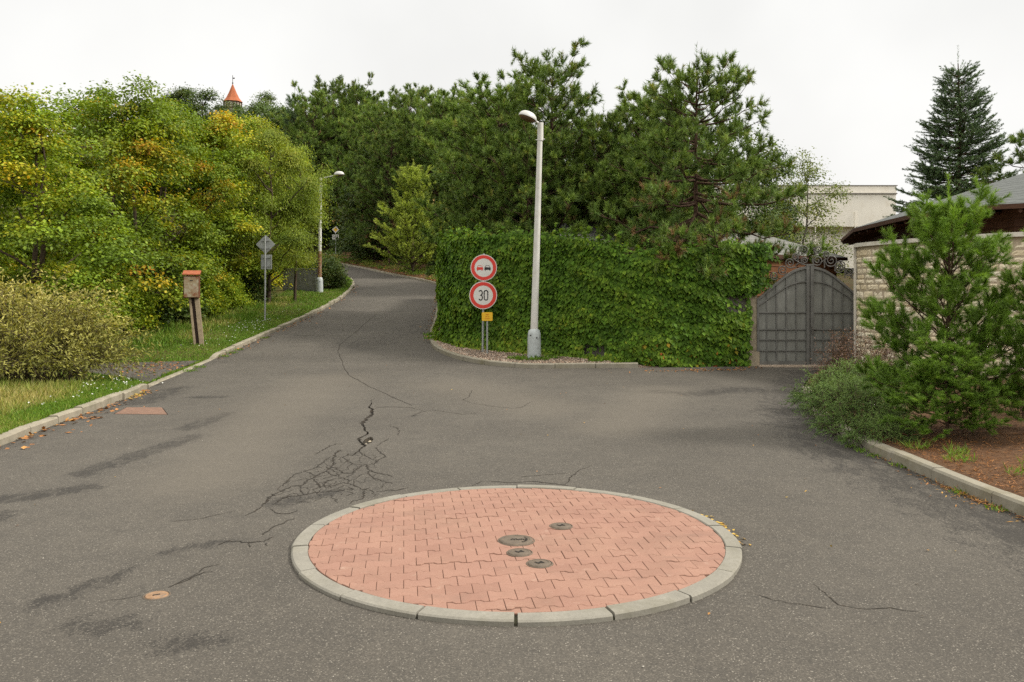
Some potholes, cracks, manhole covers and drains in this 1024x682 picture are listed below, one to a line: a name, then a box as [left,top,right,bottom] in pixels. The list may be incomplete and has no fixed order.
manhole cover [142,590,171,600]
crack [472,468,584,488]
manhole cover [549,522,573,530]
crack [750,584,909,611]
manhole cover [115,407,168,415]
manhole cover [526,559,553,568]
manhole cover [506,548,533,557]
crack [218,311,525,547]
manhole cover [498,535,535,547]
